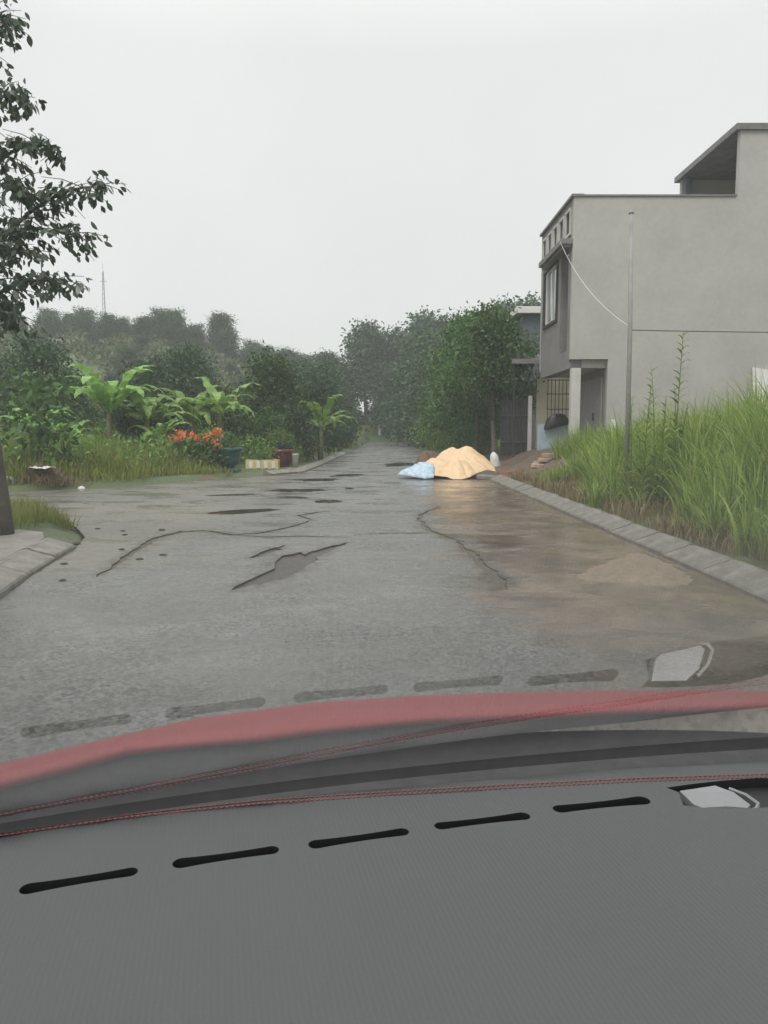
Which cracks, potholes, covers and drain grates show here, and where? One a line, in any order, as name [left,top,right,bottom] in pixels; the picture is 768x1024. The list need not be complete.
pothole [230,543,346,591]
crack [362,507,508,590]
crack [96,511,327,577]
